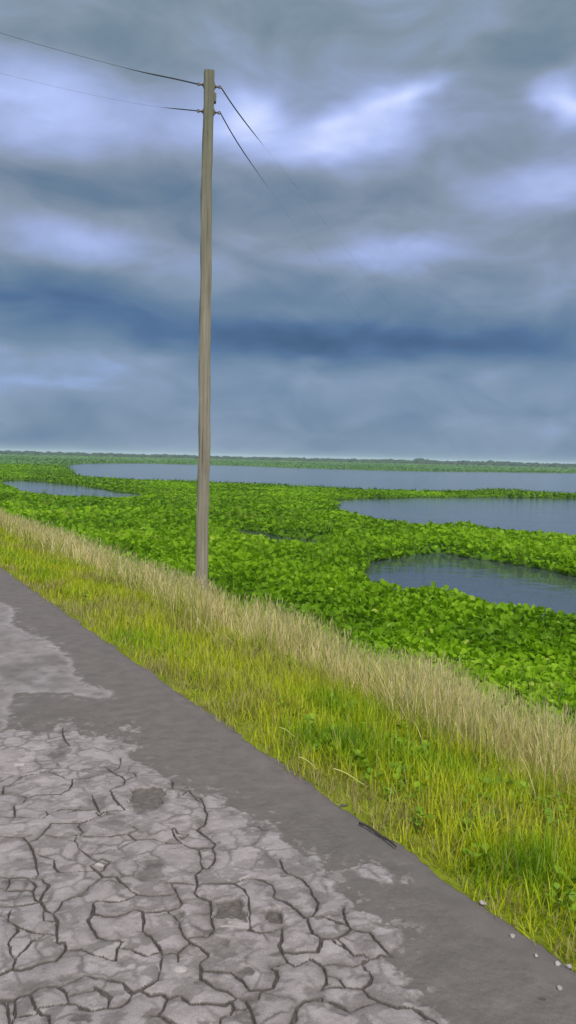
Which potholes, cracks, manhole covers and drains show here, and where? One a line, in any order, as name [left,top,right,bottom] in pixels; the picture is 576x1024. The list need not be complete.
crack [0,728,439,1024]
